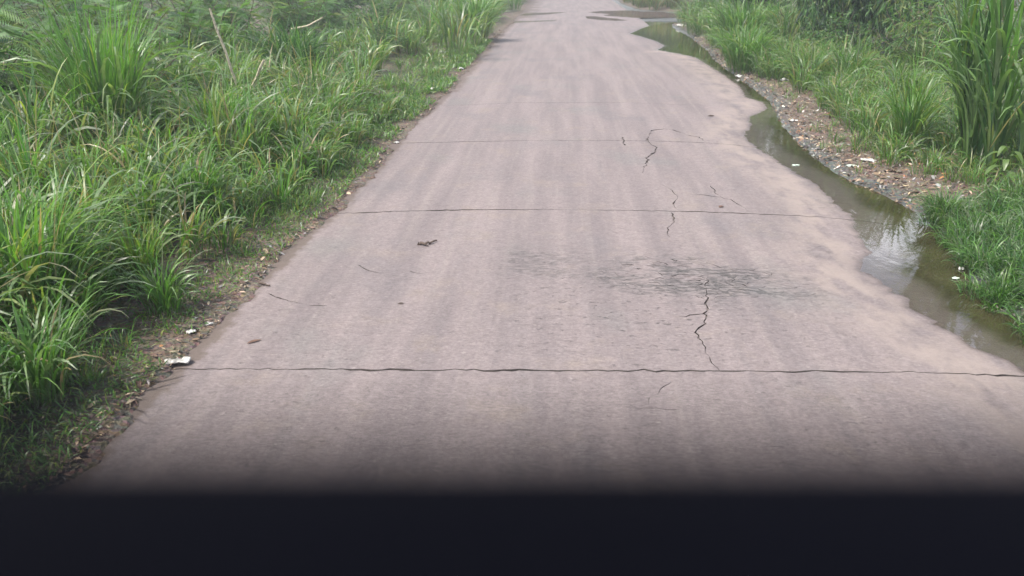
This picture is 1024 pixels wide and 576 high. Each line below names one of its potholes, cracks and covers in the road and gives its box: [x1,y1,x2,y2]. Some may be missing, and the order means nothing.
crack [609,260,830,365]
